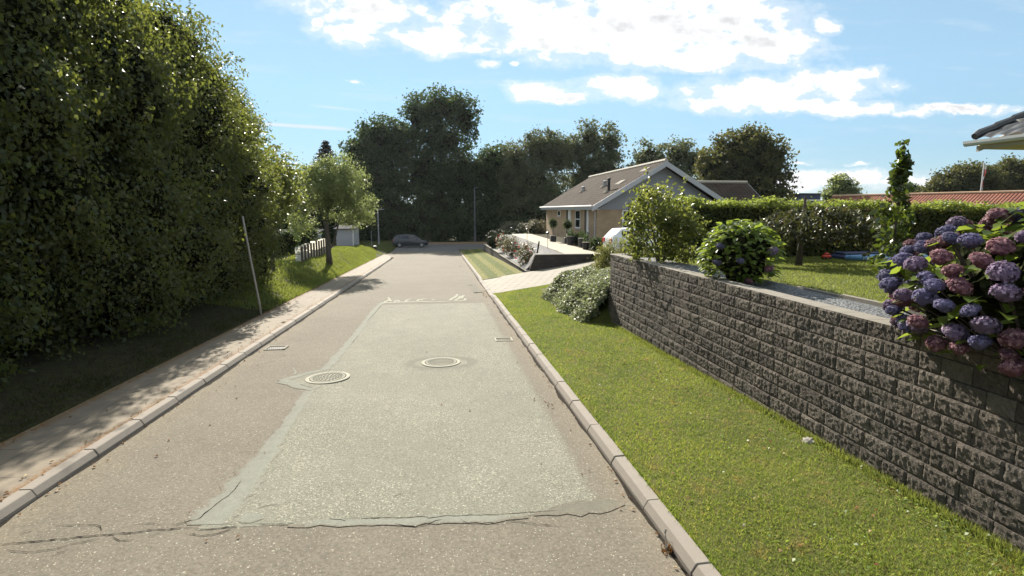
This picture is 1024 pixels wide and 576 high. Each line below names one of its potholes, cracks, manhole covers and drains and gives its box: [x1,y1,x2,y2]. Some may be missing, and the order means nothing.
crack [329,510,557,526]
manhole cover [422,357,460,368]
manhole cover [305,372,350,384]
crack [0,482,240,555]
